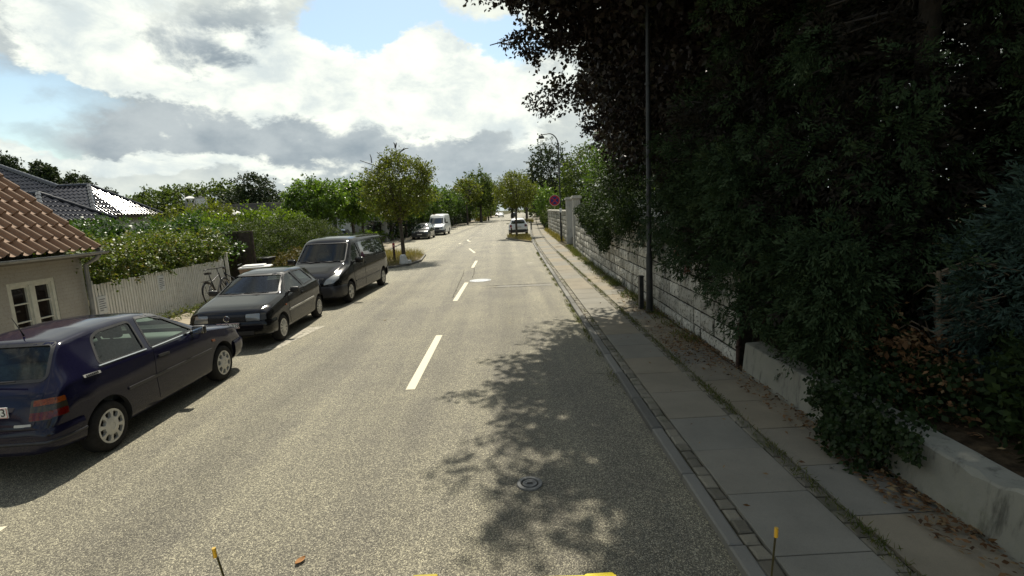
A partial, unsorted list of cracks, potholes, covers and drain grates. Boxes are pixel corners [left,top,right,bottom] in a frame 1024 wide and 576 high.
manhole cover [517,476,543,491]
